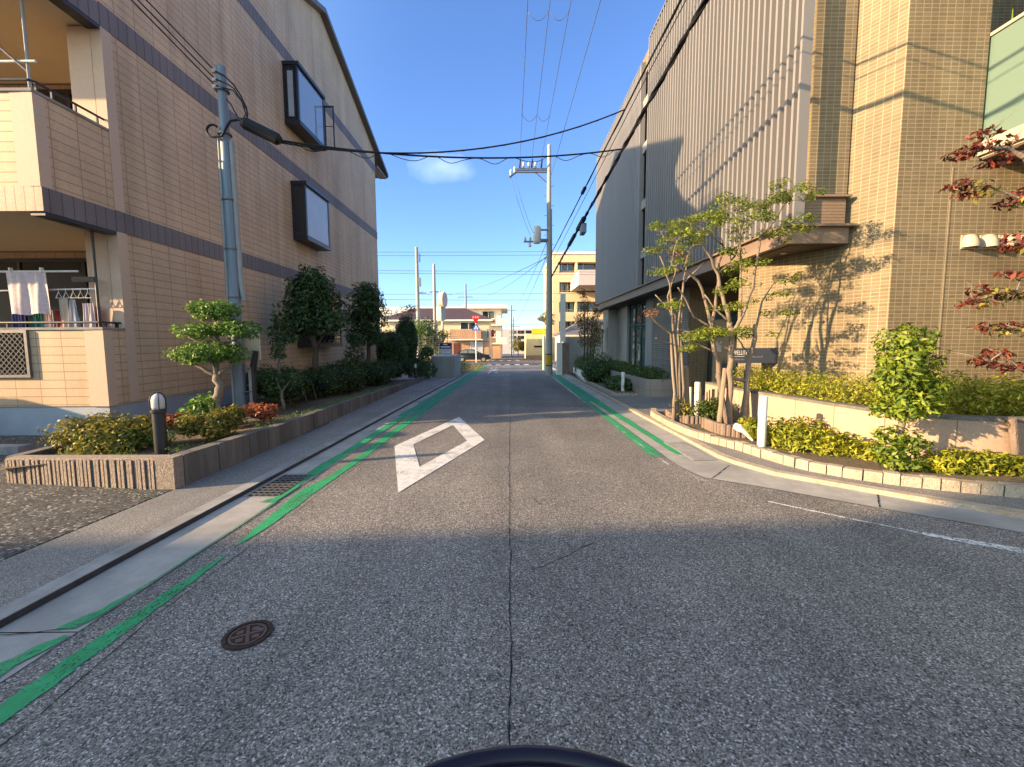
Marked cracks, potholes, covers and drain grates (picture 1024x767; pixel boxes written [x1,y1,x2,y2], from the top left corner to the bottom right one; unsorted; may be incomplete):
manhole cover [221,620,273,651]
drain grate [247,474,312,496]
